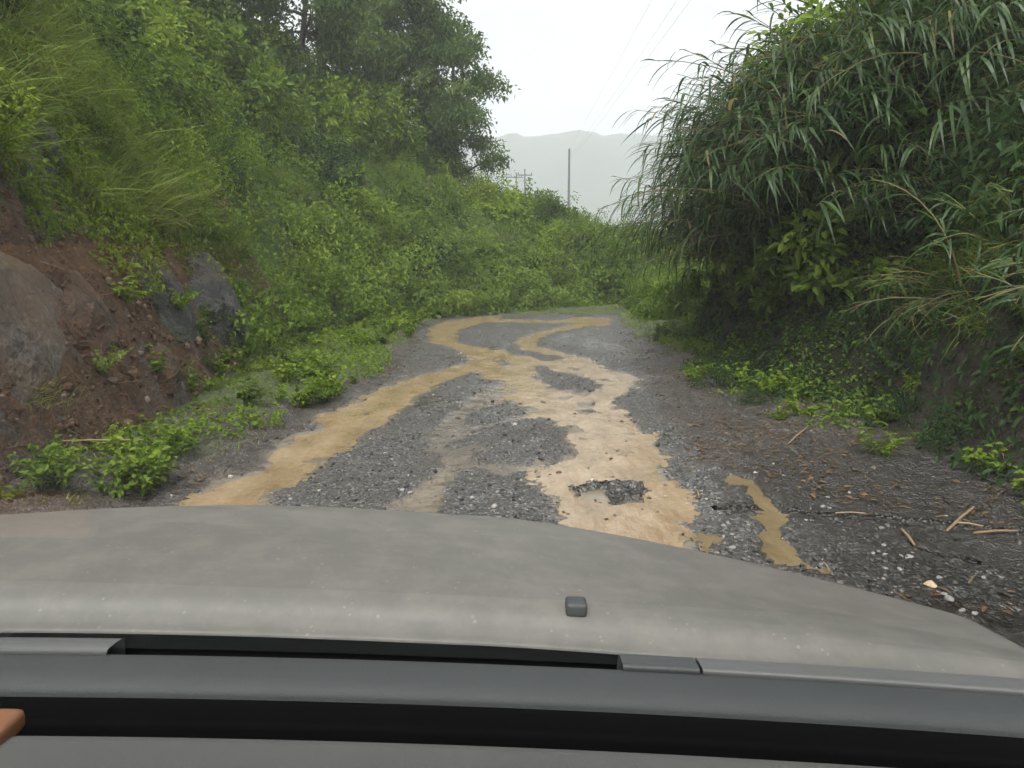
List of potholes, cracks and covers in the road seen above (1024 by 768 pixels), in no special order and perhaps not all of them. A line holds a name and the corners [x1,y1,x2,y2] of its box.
pothole [568,478,652,506]
